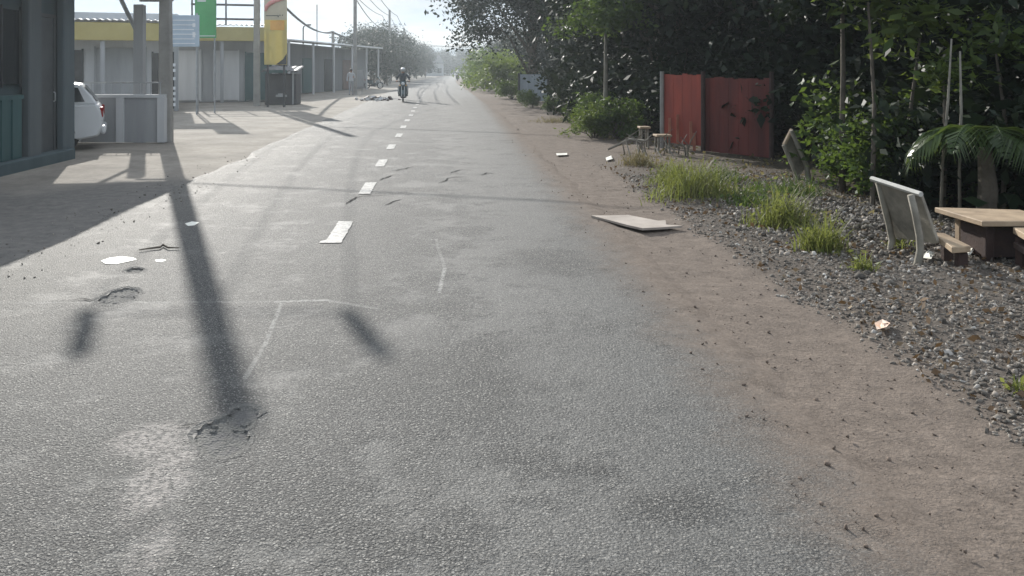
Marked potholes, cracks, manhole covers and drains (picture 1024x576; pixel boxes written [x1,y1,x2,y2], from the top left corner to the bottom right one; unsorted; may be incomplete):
pothole [89,286,147,307]
pothole [181,400,269,463]
